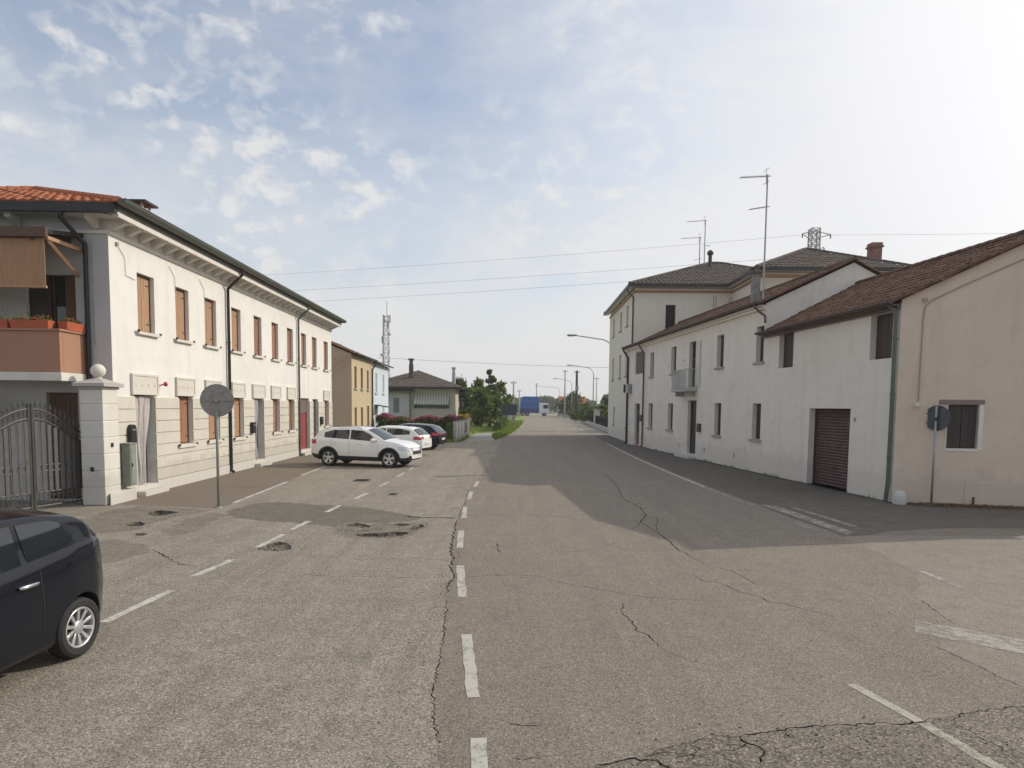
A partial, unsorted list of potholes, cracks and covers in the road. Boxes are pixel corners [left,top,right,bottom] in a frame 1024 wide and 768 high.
crack [600,718,942,768]
crack [594,473,834,617]
crack [308,482,711,760]
pothole [257,542,291,551]
crack [951,706,1022,762]
